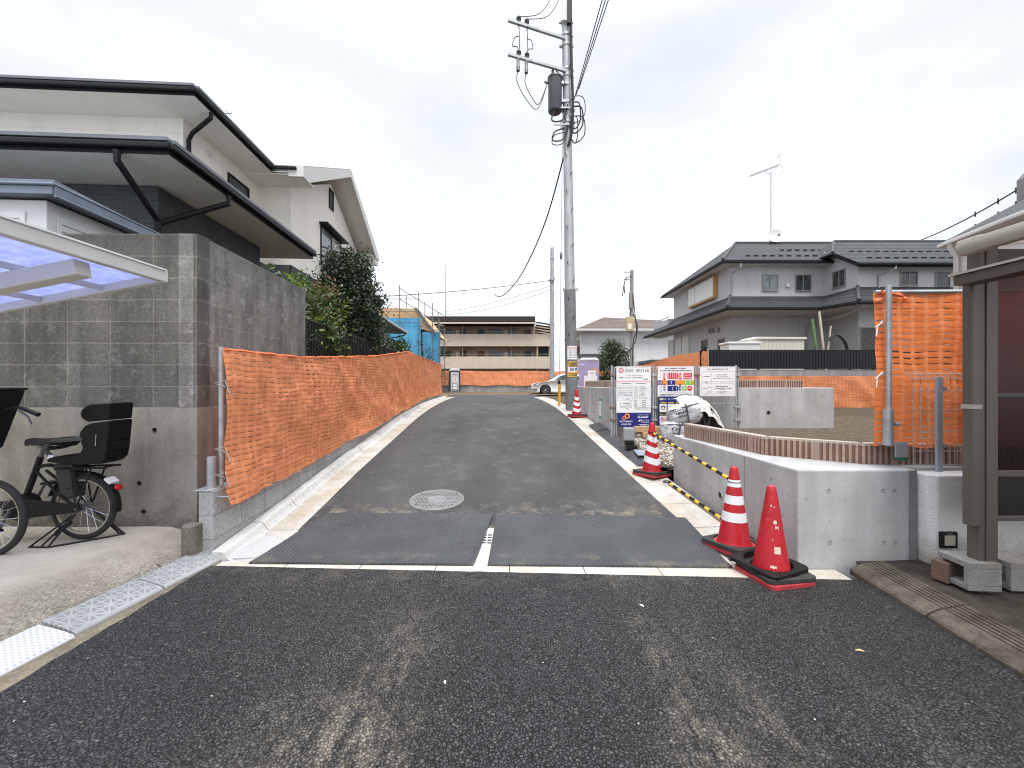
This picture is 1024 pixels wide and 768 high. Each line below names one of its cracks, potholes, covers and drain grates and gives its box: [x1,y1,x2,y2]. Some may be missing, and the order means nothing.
drain grate [482,528,494,545]
manhole cover [409,489,464,511]
